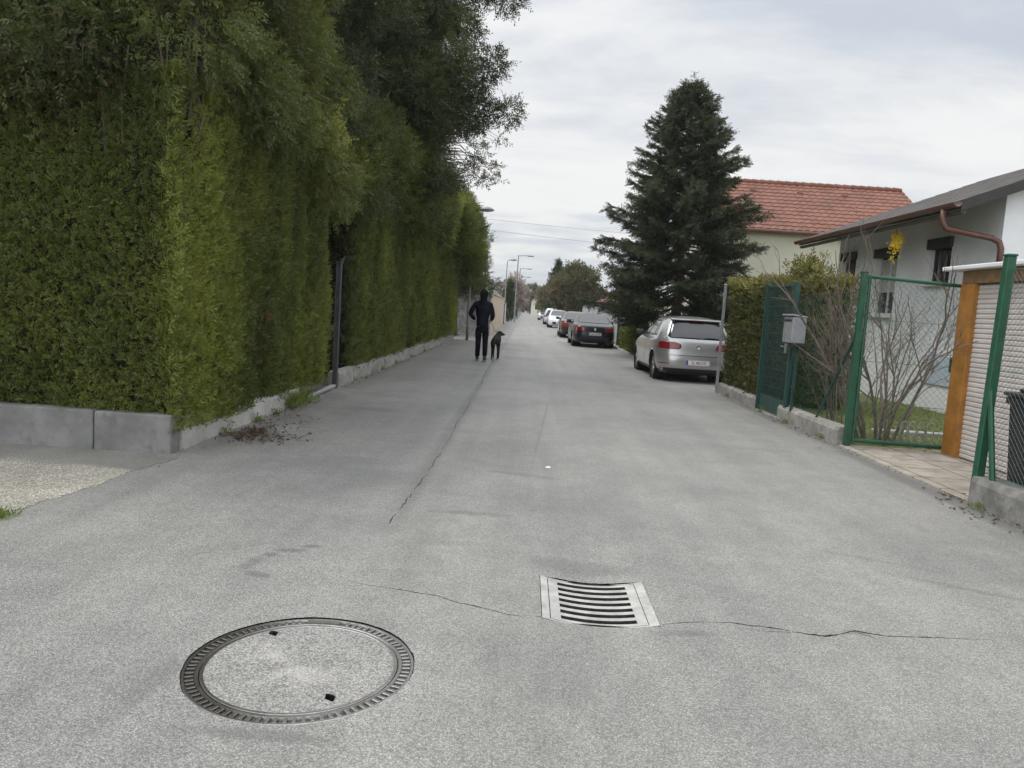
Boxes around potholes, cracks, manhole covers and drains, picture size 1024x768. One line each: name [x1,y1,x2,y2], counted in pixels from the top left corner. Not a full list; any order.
drain grate [540,575,660,628]
crack [662,622,987,640]
crack [361,583,539,617]
manhole cover [180,619,415,725]
